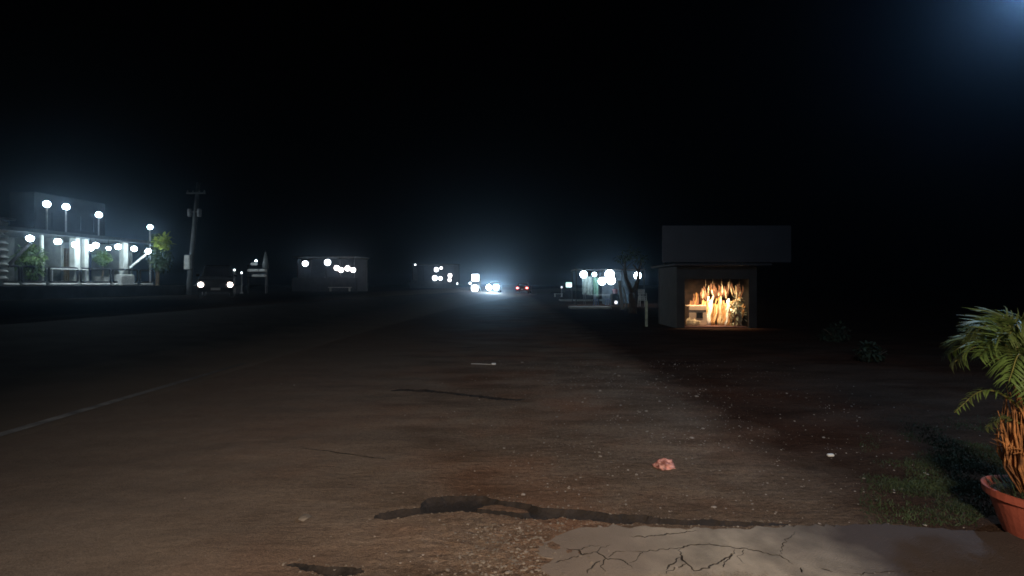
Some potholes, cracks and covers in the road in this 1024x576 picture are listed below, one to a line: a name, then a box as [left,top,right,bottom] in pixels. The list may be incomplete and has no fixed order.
crack [304,448,385,459]
pothole [286,563,364,576]
crack [555,530,946,575]
pothole [374,495,788,527]
